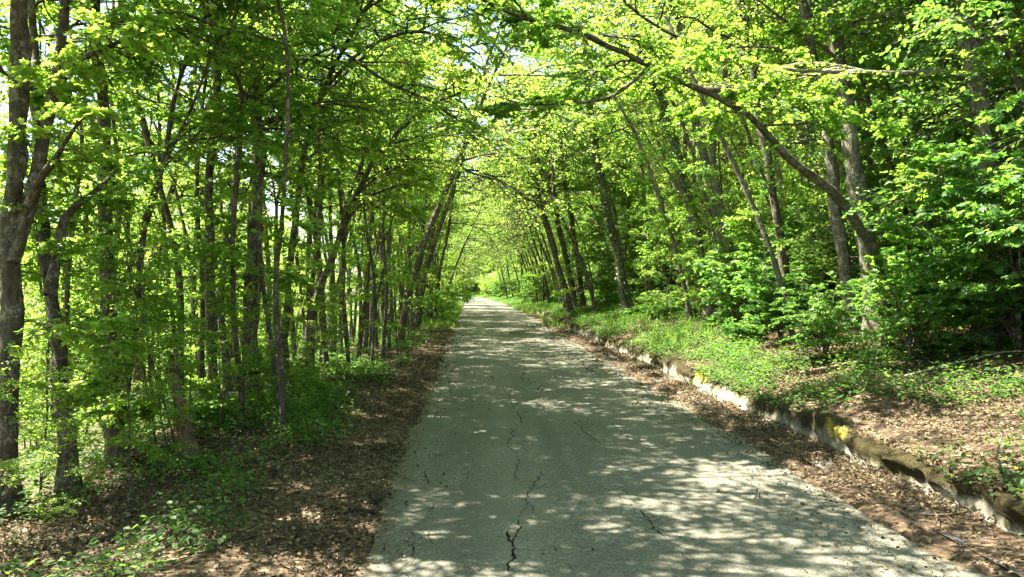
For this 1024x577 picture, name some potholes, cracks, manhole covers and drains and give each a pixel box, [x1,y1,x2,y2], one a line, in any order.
crack [496,363,547,572]
